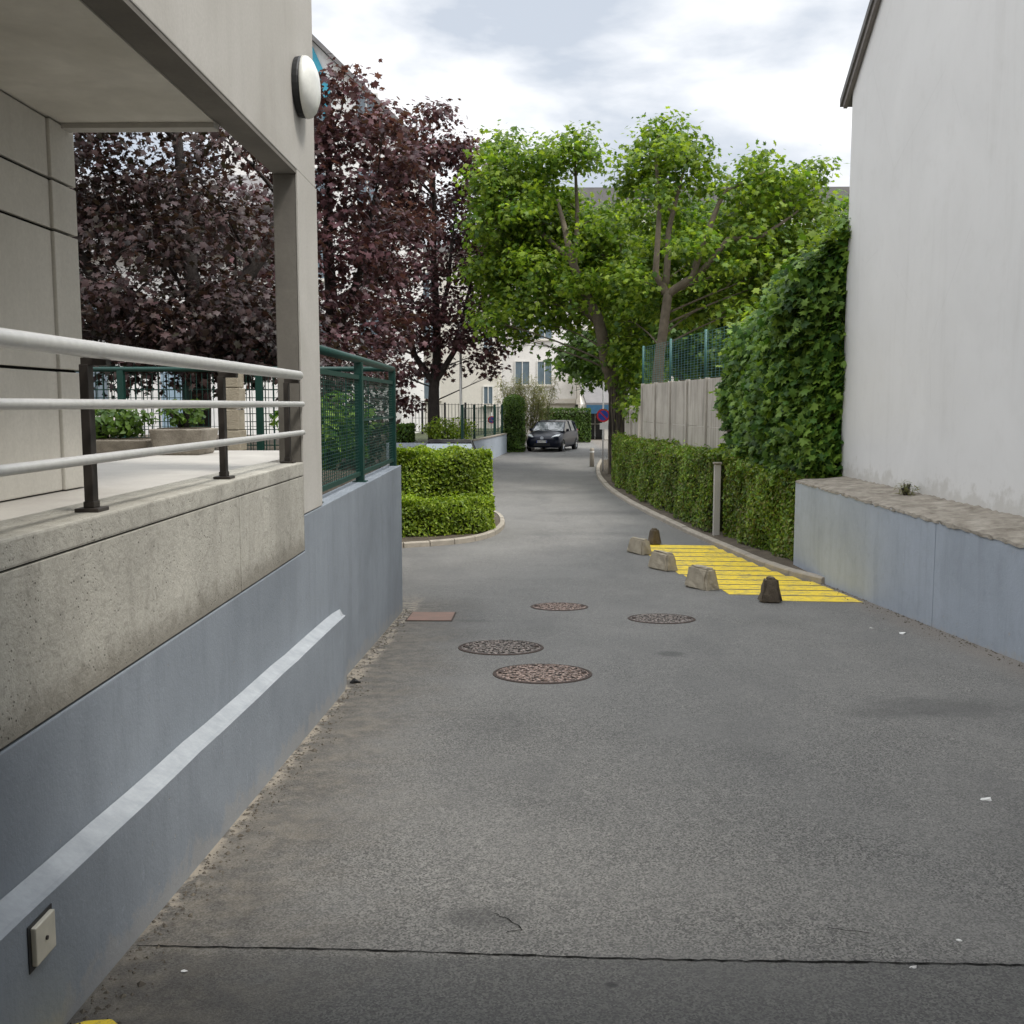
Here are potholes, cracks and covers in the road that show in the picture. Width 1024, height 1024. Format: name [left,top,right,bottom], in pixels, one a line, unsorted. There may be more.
manhole cover [530,602,588,611]
manhole cover [458,640,544,655]
manhole cover [492,664,592,684]
manhole cover [628,614,696,624]
utility cover [405,612,456,621]
